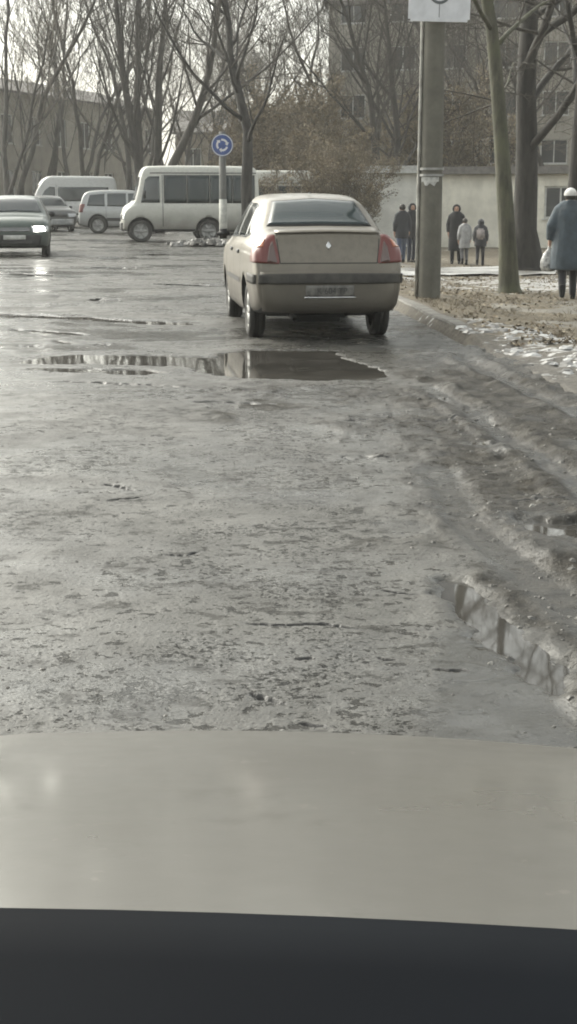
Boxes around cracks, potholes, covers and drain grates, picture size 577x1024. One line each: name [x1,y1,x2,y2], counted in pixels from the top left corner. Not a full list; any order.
pothole [15,348,398,382]
